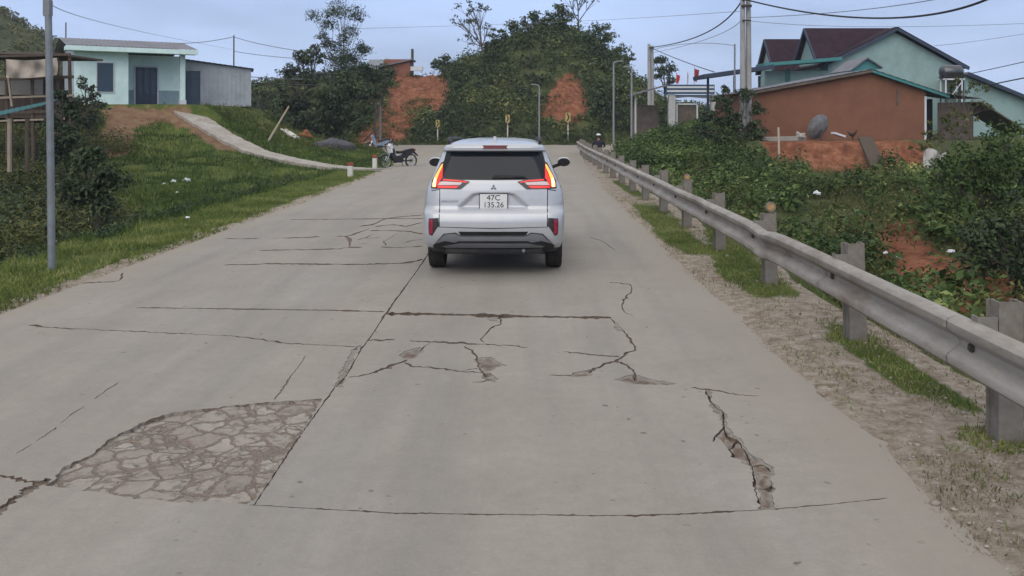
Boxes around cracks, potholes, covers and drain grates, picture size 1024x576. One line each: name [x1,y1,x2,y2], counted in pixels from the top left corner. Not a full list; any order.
crack [0,475,51,515]
crack [17,384,116,453]
crack [554,282,636,379]
crack [691,387,774,504]
crack [28,318,526,400]
